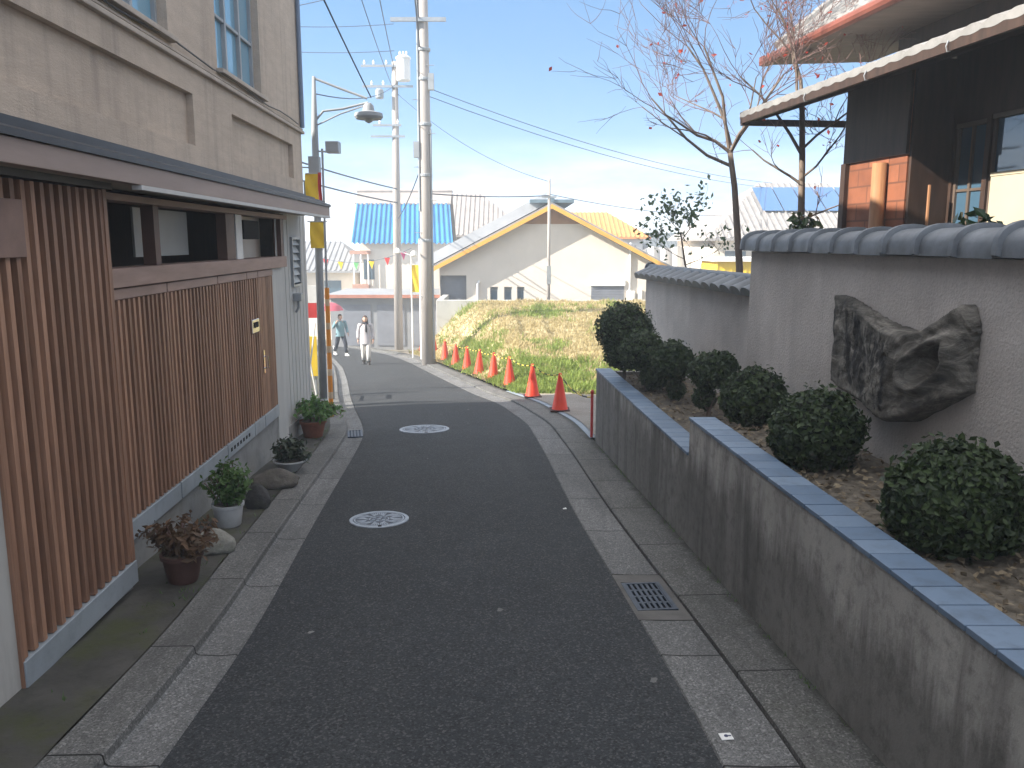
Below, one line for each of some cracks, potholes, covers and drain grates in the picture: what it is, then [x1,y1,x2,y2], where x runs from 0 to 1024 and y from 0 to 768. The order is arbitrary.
manhole cover [349,511,409,528]
drain grate [347,430,363,438]
manhole cover [399,425,449,434]
drain grate [621,582,679,611]
